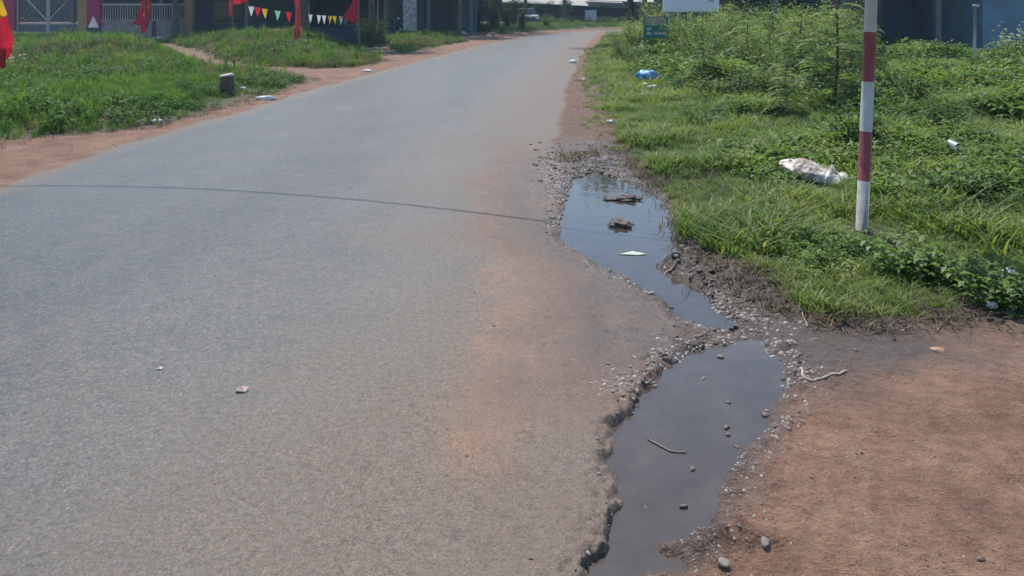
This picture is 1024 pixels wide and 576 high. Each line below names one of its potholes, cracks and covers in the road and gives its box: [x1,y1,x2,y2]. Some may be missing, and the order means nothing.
pothole [557,172,738,331]
pothole [572,341,791,576]
